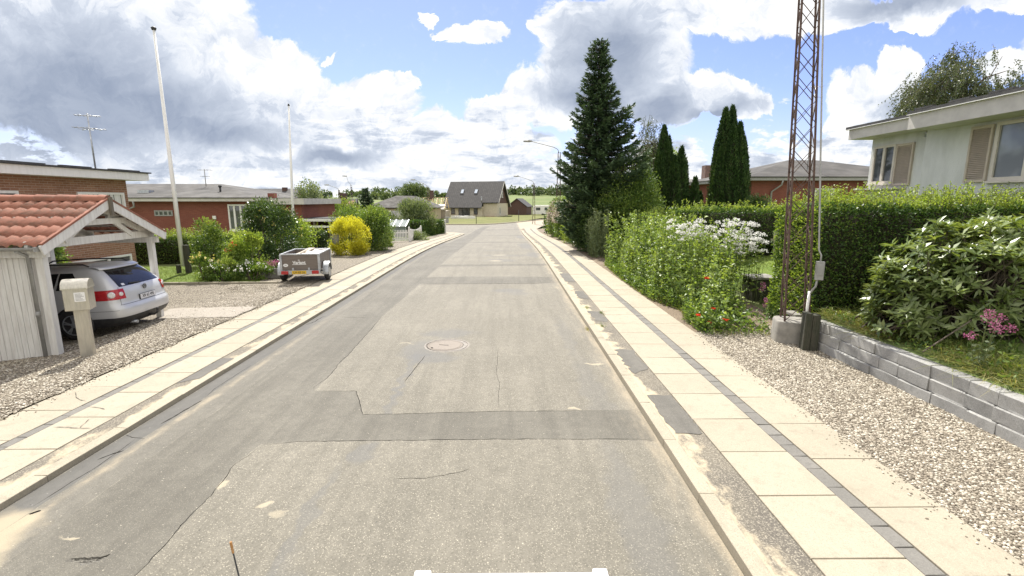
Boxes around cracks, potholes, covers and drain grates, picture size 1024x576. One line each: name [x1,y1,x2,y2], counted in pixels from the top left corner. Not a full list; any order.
crack [135,448,258,576]
manhole cover [424,339,470,352]
pothole [66,554,110,566]
